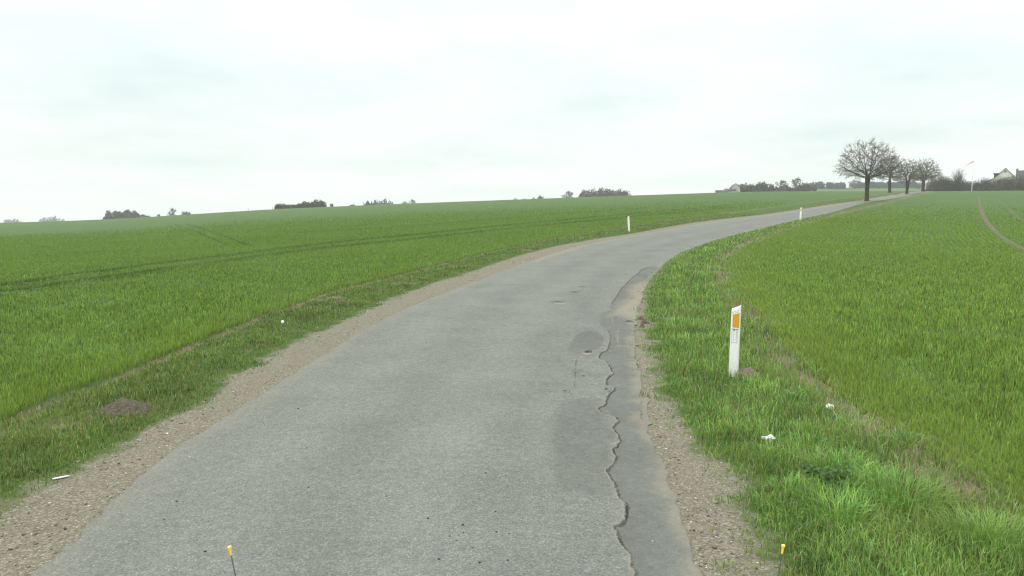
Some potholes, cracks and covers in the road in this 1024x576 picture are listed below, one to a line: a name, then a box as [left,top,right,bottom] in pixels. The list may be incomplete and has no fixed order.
crack [566,266,662,576]
